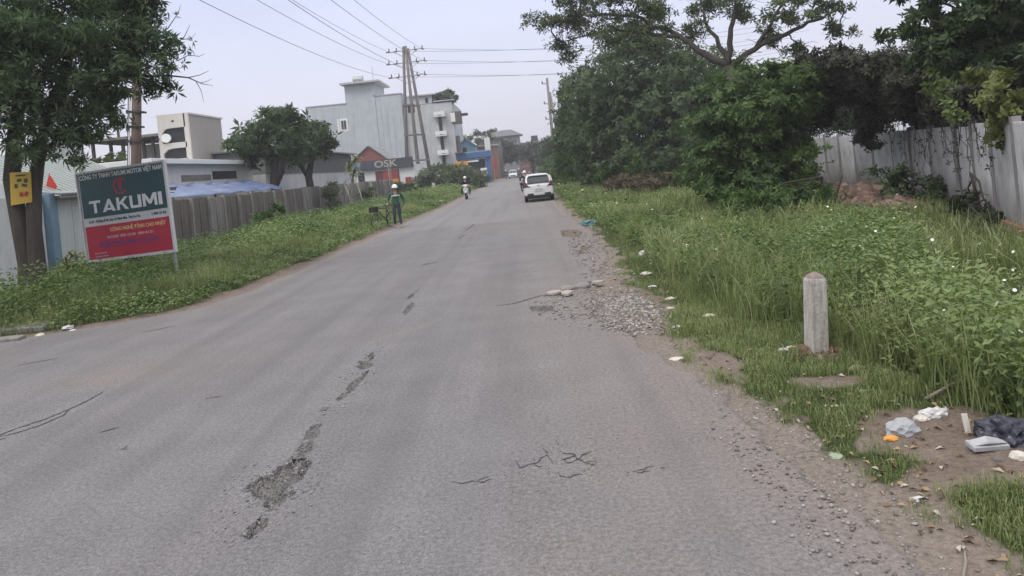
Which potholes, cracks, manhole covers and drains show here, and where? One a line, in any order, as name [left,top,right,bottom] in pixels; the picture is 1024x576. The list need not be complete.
pothole [233,454,319,520]
pothole [520,304,561,313]
pothole [394,300,422,317]
pothole [350,348,383,374]
pothole [232,511,279,545]
crack [0,391,104,439]
crack [517,448,597,478]
